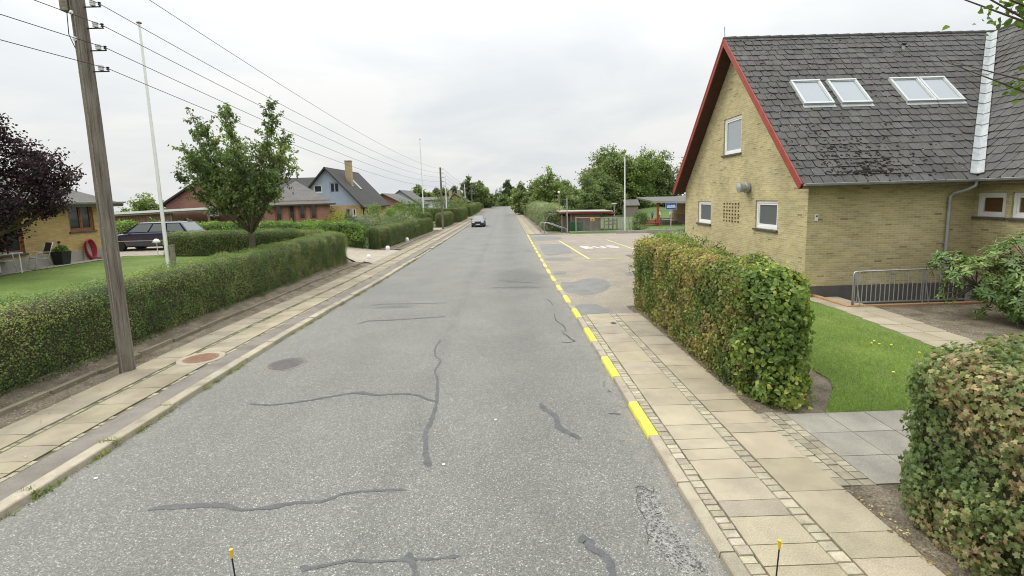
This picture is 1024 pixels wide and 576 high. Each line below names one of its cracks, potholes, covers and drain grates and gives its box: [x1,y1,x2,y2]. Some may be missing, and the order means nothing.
manhole cover [263,357,307,371]
manhole cover [176,351,226,365]
crack [359,303,445,324]
crack [495,280,575,343]
